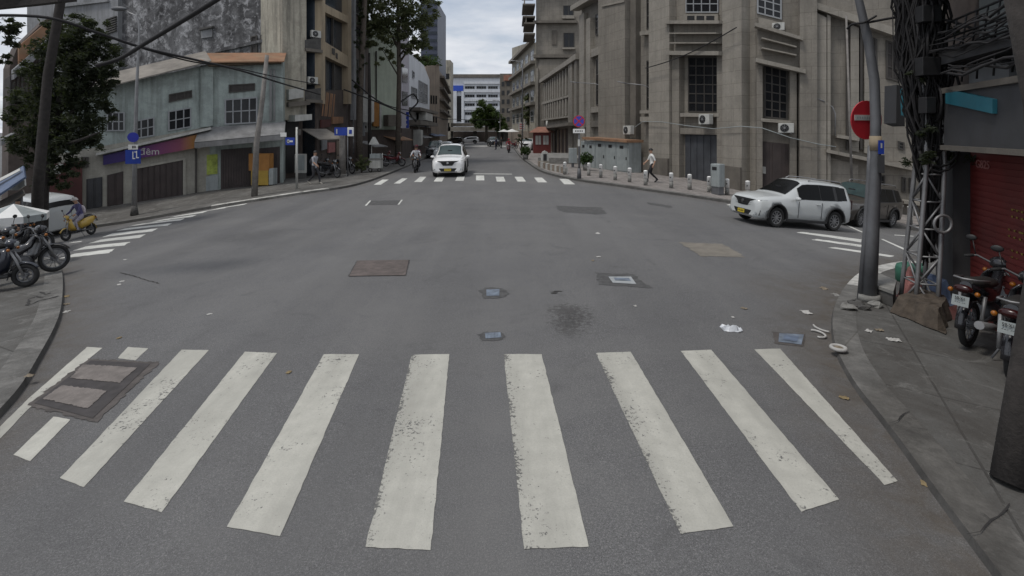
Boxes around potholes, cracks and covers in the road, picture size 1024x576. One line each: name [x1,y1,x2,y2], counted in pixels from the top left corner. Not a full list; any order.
manhole cover [595,272,652,288]
manhole cover [348,260,410,277]
manhole cover [477,331,506,341]
manhole cover [28,358,159,422]
manhole cover [478,287,509,298]
